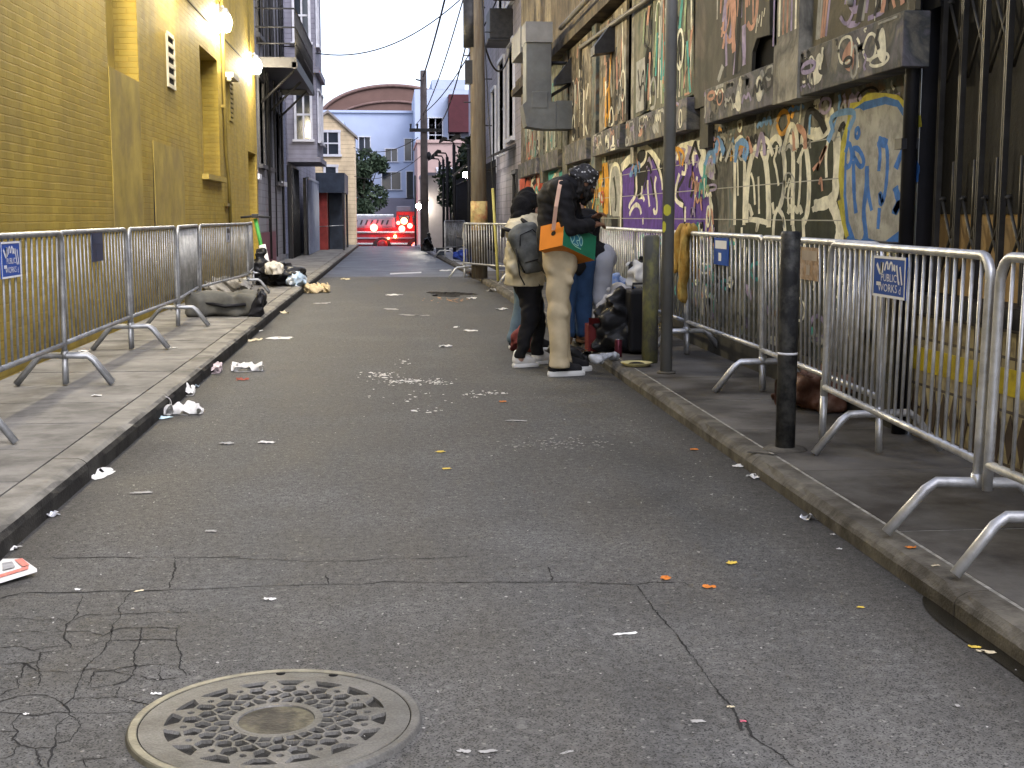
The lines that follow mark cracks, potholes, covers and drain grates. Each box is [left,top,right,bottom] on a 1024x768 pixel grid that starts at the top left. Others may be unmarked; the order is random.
manhole cover [125,669,422,768]
crack [0,556,795,767]
